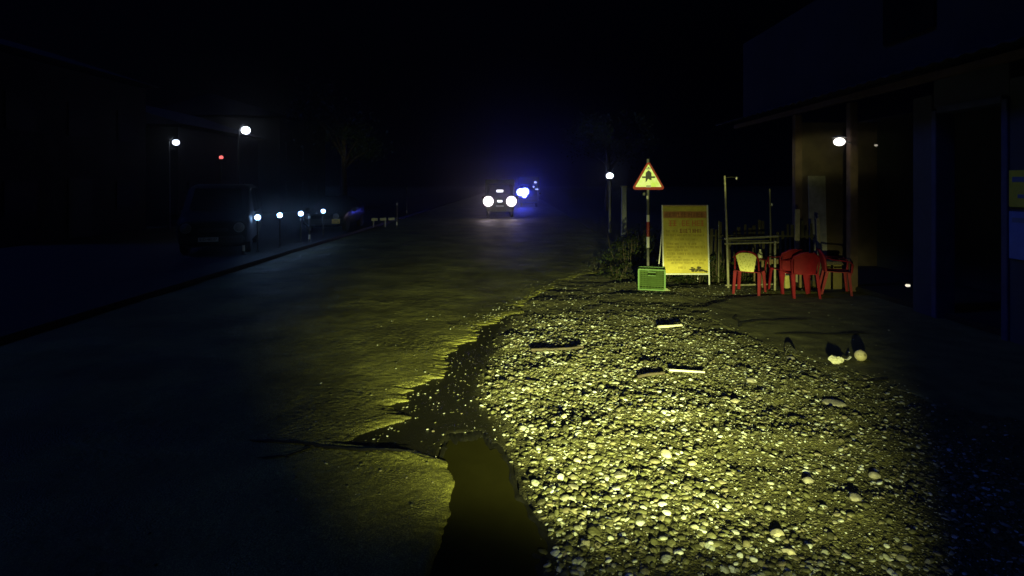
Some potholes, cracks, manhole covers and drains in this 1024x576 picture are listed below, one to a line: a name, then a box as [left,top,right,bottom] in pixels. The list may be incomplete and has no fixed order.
pothole [429,430,557,576]
crack [732,315,864,335]
crack [249,439,412,458]
